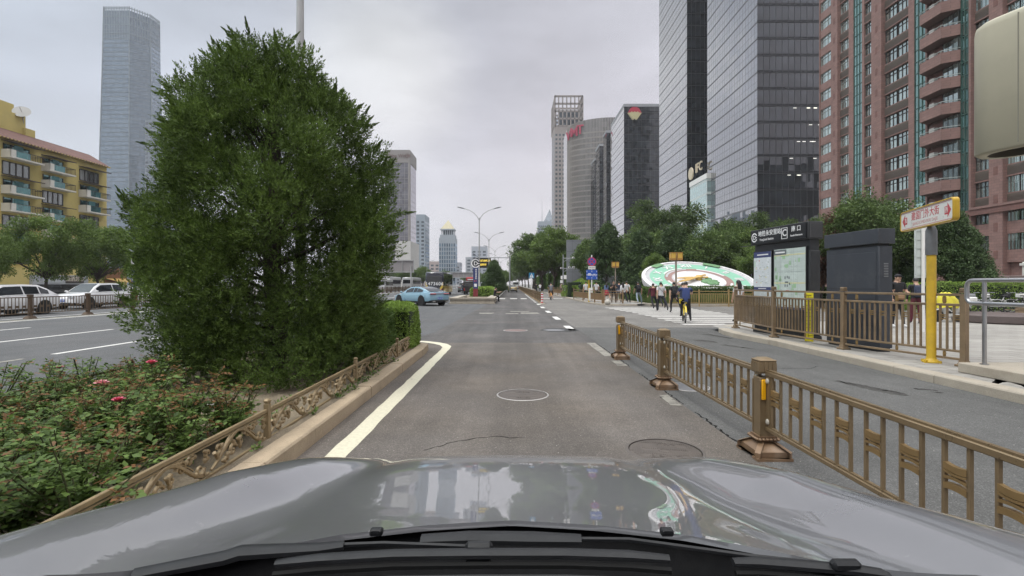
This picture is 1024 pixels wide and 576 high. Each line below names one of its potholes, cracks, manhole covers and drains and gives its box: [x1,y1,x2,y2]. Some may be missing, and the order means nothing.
crack [423,436,523,451]
manhole cover [625,438,706,459]
crack [600,346,737,442]
